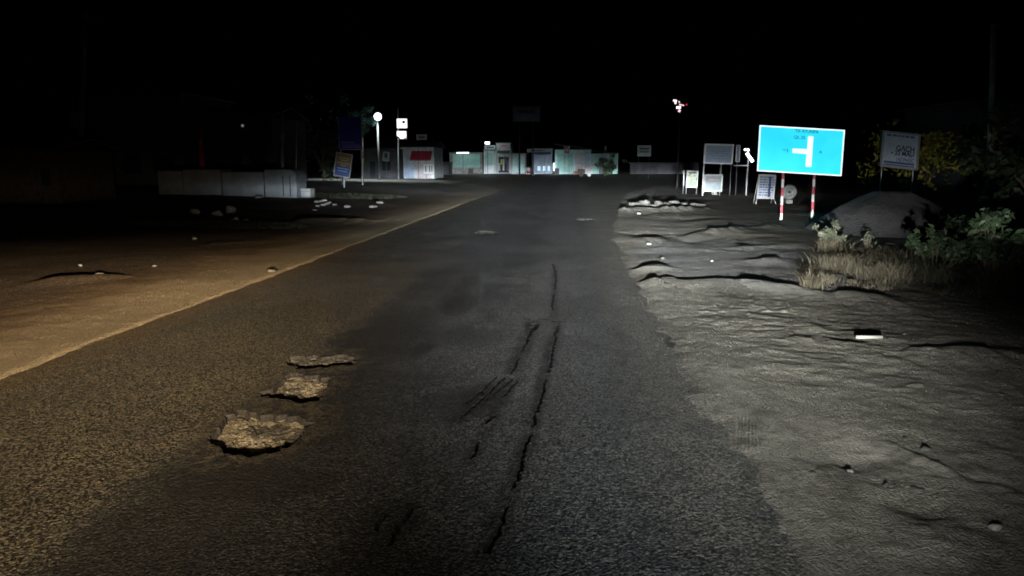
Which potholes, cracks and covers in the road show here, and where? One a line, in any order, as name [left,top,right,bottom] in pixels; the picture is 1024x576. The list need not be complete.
pothole [206,410,313,458]
pothole [284,355,357,369]
pothole [255,373,331,403]
crack [459,263,567,554]
